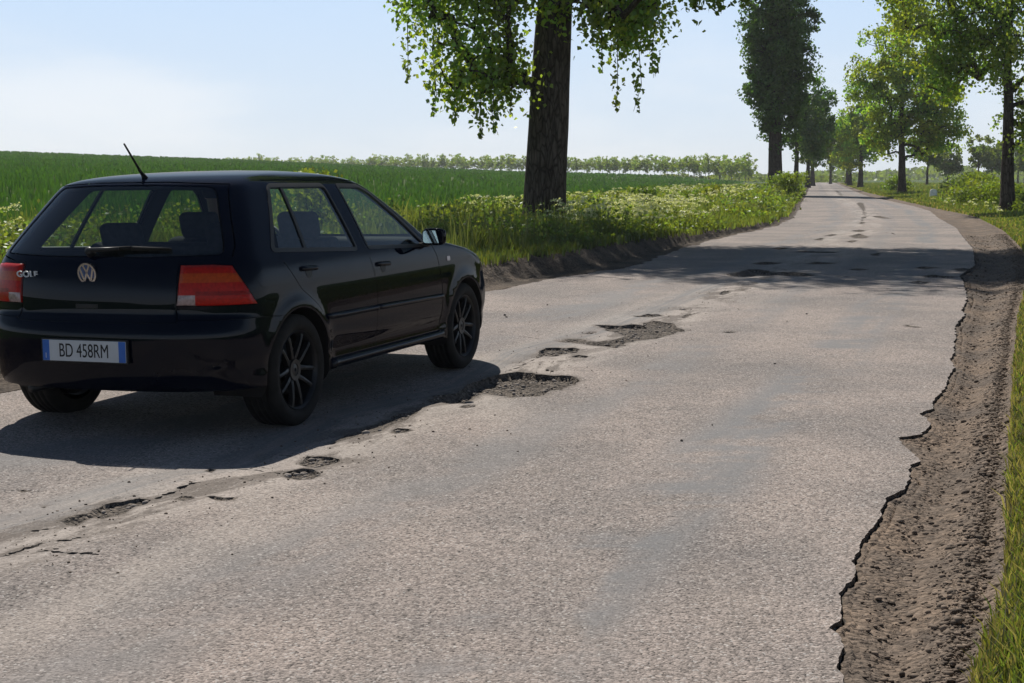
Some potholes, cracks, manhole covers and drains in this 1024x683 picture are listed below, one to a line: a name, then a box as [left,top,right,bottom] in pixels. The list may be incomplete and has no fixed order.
pothole [726,269,815,277]
pothole [428,372,580,404]
pothole [282,468,321,480]
pothole [558,321,685,348]
pothole [299,456,340,468]
pothole [59,498,151,526]
crack [0,528,99,557]
pothole [536,348,579,358]
